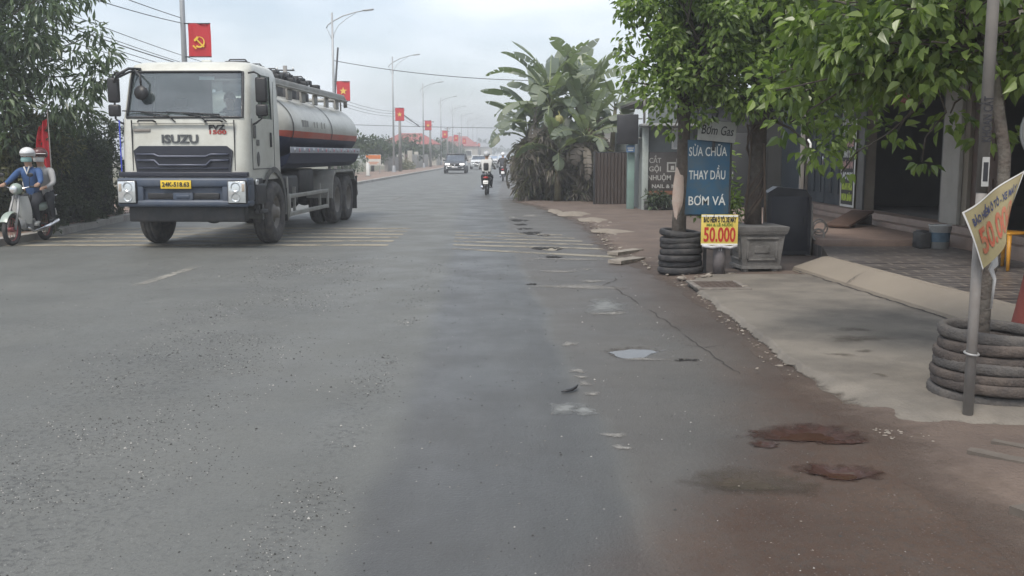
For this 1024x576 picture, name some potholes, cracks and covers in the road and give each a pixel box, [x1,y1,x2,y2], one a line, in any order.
crack [600,278,740,373]
pothole [608,347,659,359]
